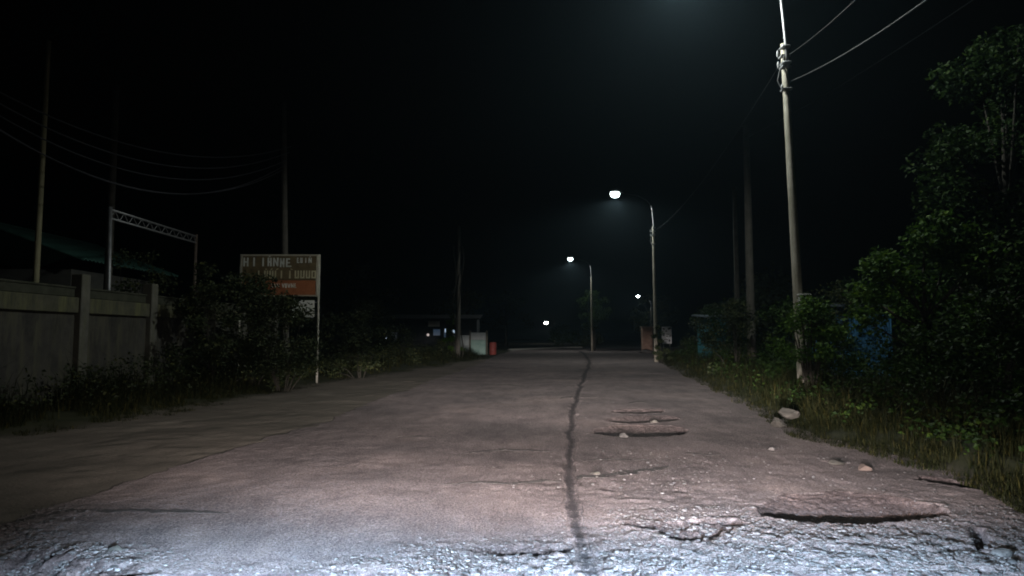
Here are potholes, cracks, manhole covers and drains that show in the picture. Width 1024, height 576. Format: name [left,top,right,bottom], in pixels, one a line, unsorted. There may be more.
crack [0,509,228,527]
pothole [744,489,968,527]
pothole [586,424,693,439]
pothole [598,415,686,424]
crack [445,348,722,576]
